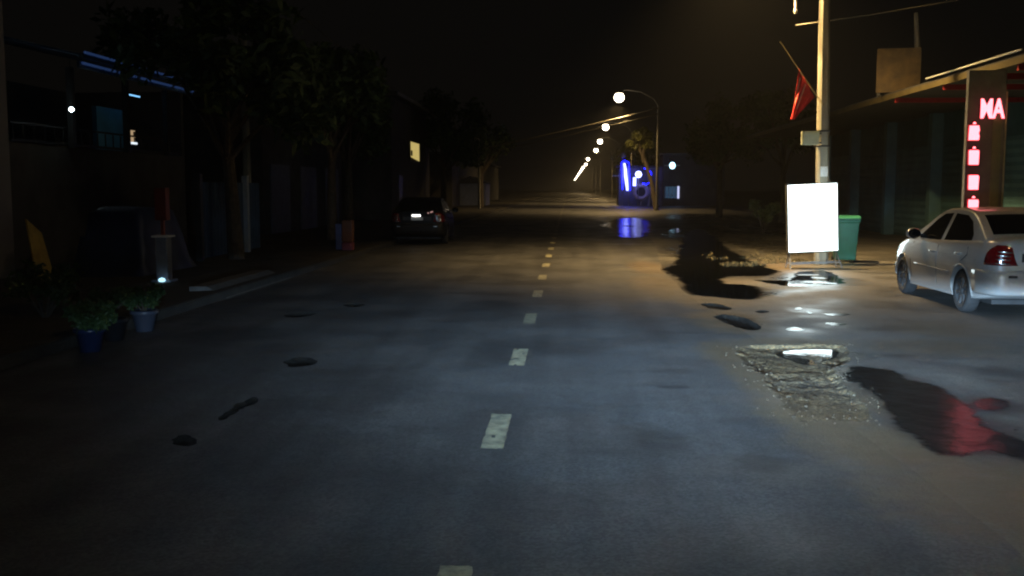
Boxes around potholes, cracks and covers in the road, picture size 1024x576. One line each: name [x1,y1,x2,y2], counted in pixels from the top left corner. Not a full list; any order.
pothole [717,342,880,425]
pothole [172,434,197,446]
pothole [283,357,318,367]
pothole [713,314,763,330]
